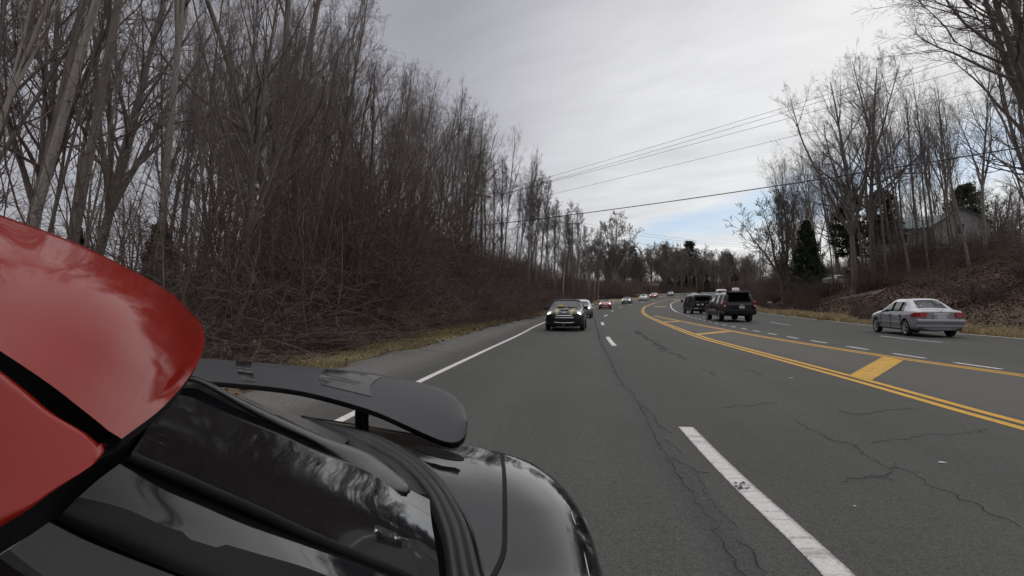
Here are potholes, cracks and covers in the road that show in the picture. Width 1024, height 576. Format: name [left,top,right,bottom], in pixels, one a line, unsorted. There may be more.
crack [794,419,1020,526]
crack [594,319,765,575]
